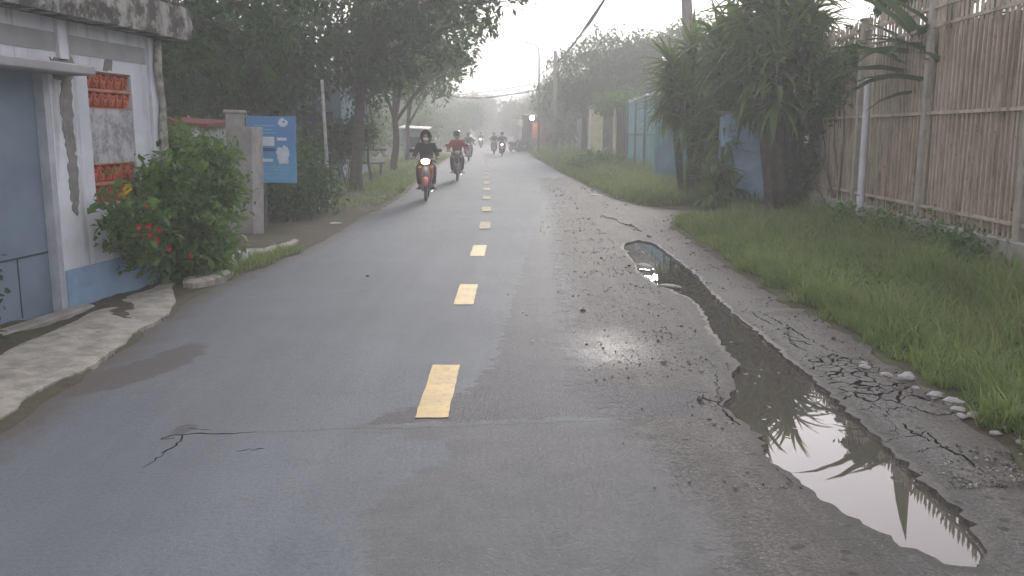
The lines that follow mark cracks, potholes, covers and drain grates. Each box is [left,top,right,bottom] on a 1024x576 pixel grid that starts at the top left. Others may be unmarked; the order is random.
crack [752,312,1009,484]
pothole [624,240,987,567]
crack [143,428,263,468]
